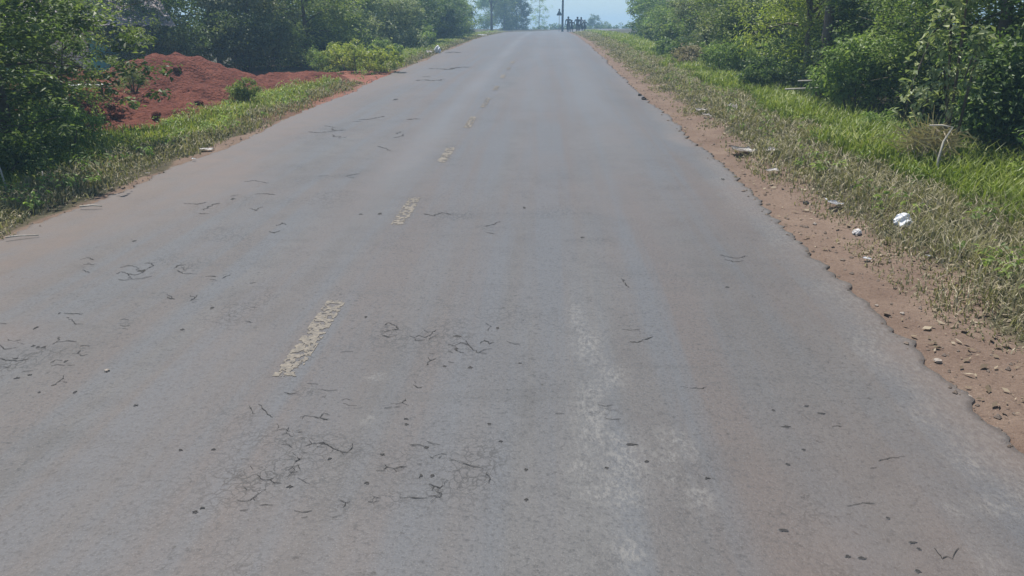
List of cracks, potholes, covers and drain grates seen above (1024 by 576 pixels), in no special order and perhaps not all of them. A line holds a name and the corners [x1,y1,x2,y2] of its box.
crack [368,442,490,502]
crack [384,322,519,365]
crack [186,180,285,233]
crack [238,383,357,511]
